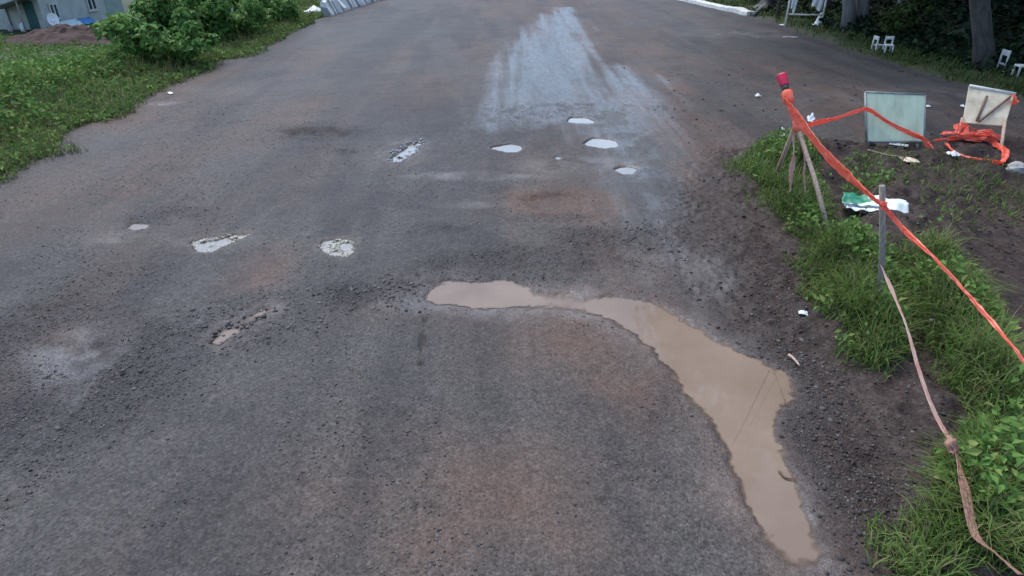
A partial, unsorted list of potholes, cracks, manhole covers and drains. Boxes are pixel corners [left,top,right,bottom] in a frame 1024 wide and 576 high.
pothole [488,142,525,153]
pothole [416,274,839,576]
pothole [580,136,622,149]
pothole [182,230,256,254]
pothole [120,220,157,231]
pothole [383,137,430,163]
pothole [196,299,288,352]
pothole [312,236,361,260]
pothole [565,116,598,124]
pothole [611,164,642,175]
